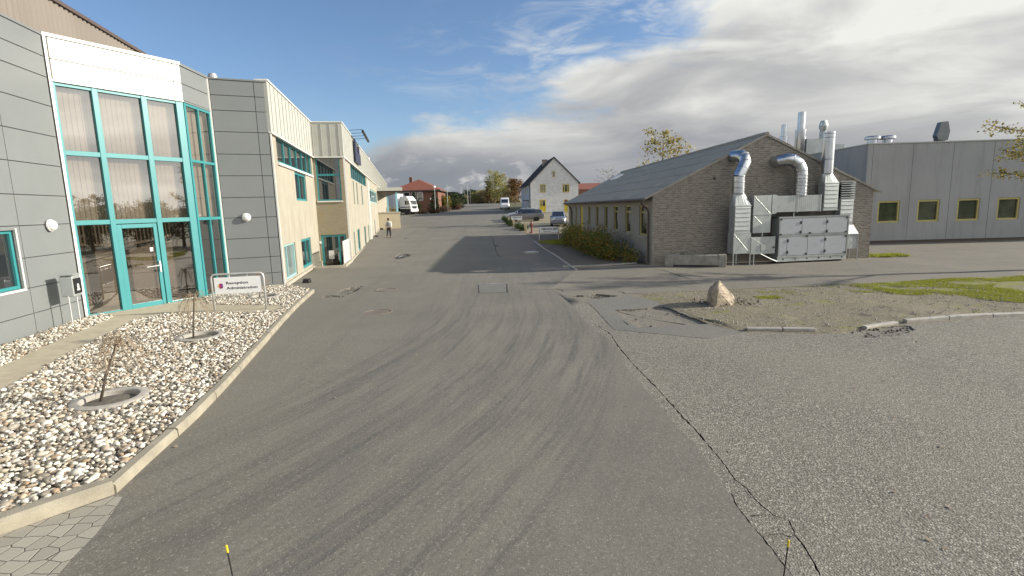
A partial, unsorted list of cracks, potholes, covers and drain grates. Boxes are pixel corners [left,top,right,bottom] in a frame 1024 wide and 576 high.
pothole [848,326,916,338]
manhole cover [477,283,508,293]
pothole [337,286,363,295]
crack [585,291,820,576]
